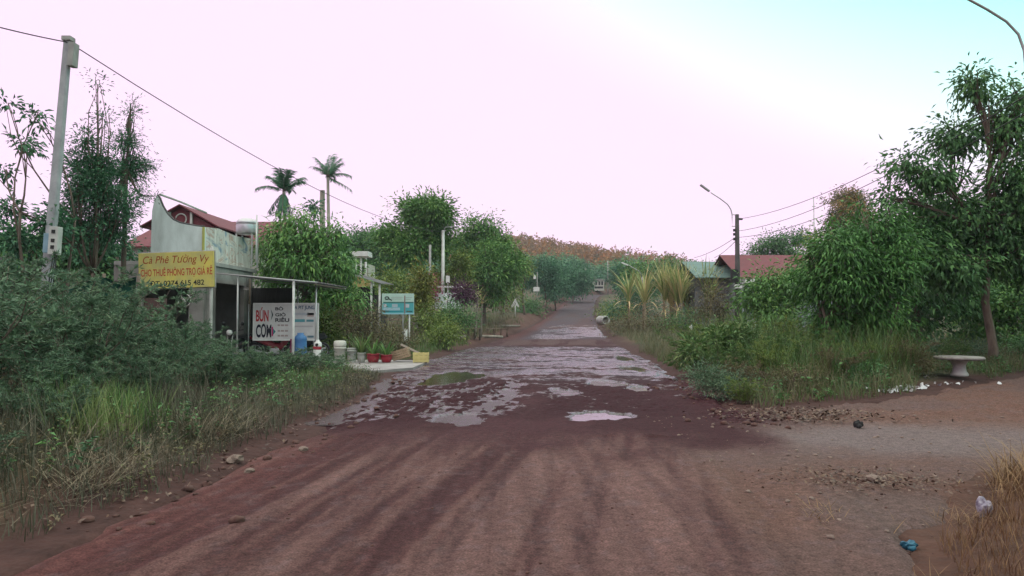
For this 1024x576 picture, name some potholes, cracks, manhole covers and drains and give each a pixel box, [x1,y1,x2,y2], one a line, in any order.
pothole [429,412,485,426]
pothole [567,410,635,421]
pothole [414,370,488,386]
